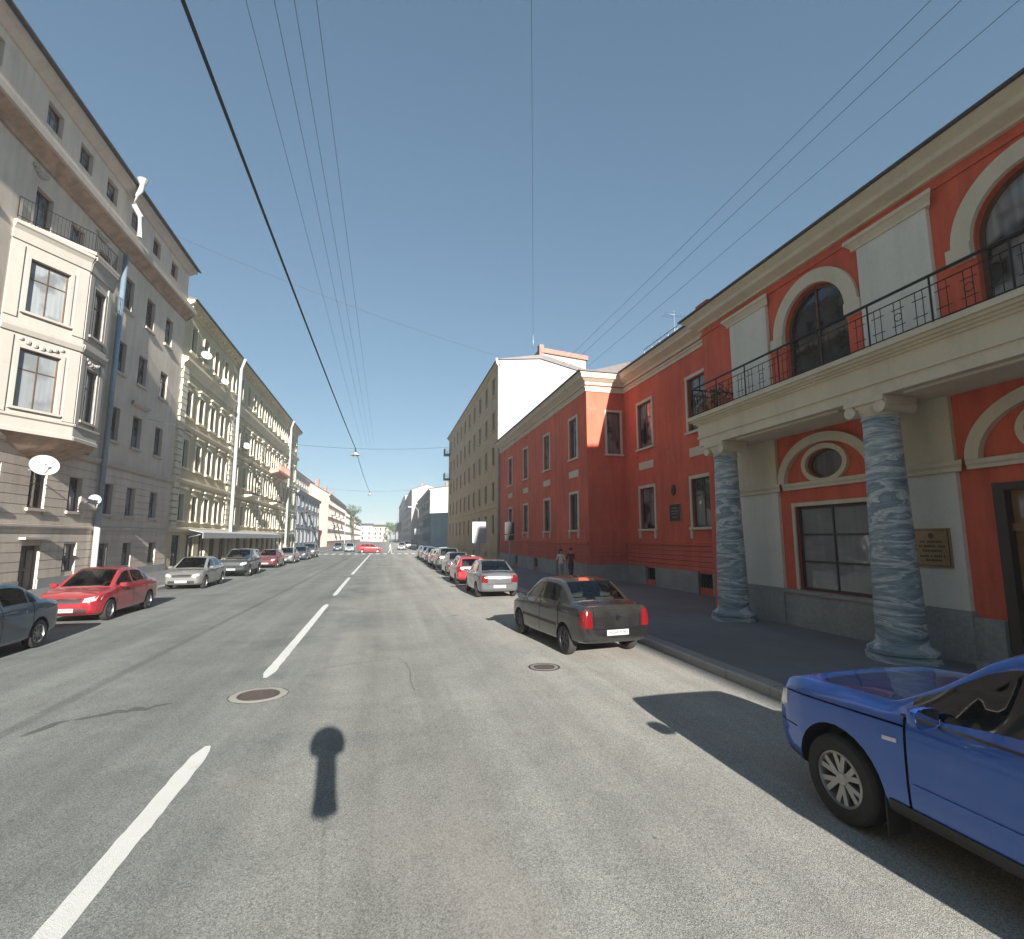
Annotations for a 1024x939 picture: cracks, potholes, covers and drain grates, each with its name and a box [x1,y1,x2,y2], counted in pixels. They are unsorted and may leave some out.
crack [309,658,416,695]
manhole cover [227,687,289,704]
crack [20,702,173,737]
manhole cover [529,663,560,671]
